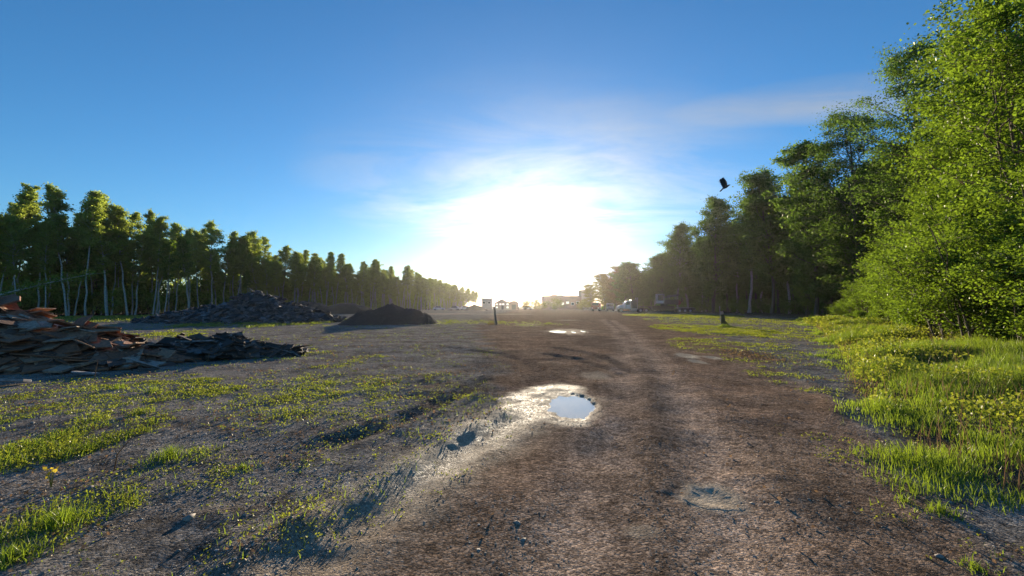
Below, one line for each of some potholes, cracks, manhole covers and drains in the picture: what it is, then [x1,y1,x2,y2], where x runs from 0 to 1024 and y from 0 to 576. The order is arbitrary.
pothole [681,484,745,511]
pothole [531,388,604,425]
